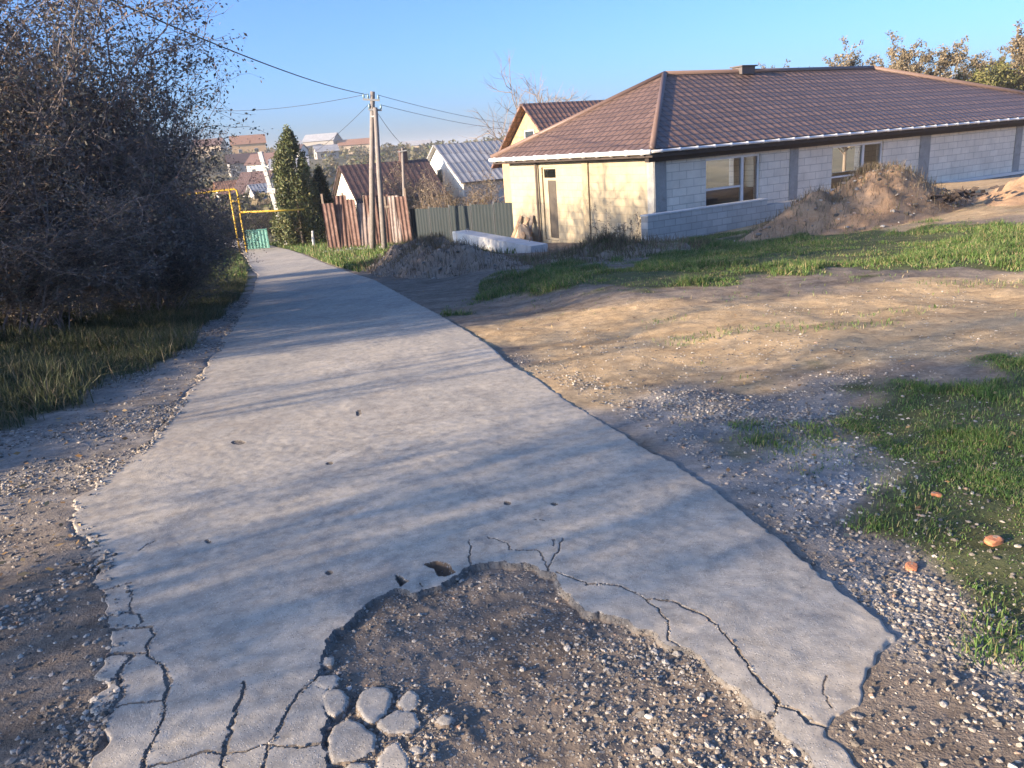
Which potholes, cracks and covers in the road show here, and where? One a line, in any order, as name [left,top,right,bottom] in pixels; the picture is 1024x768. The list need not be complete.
crack [90,582,322,768]
pothole [315,560,815,768]
crack [467,536,833,732]
